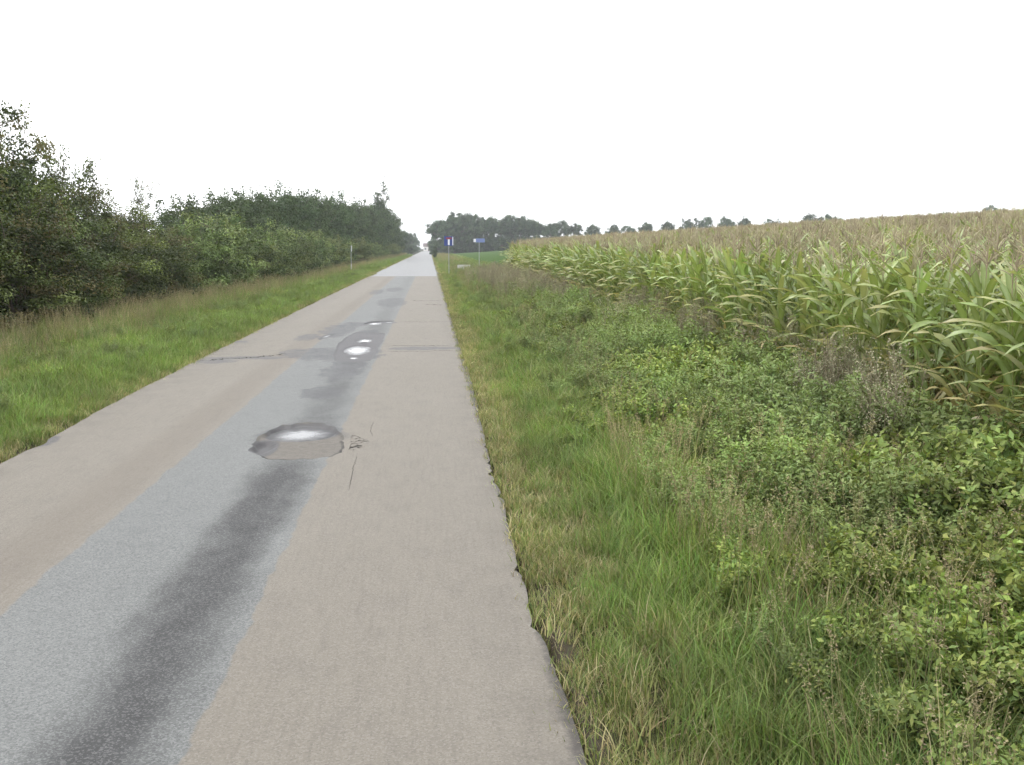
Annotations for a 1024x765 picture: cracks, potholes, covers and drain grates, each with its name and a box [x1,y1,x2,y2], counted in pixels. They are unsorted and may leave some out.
pothole [333,332,385,362]
crack [349,423,374,488]
pothole [248,422,344,460]
